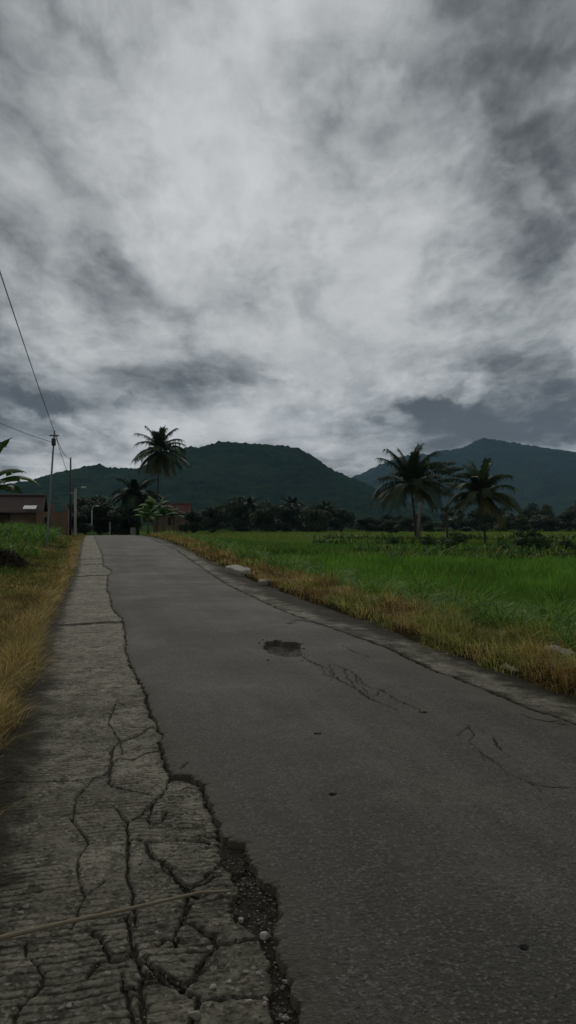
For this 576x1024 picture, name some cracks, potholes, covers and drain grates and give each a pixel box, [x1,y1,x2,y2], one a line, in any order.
crack [90,703,269,1024]
pothole [217,844,300,1024]
crack [304,648,420,711]
crack [457,726,535,786]
pothole [263,640,302,657]
crack [13,948,45,1024]
crack [6,778,105,930]
